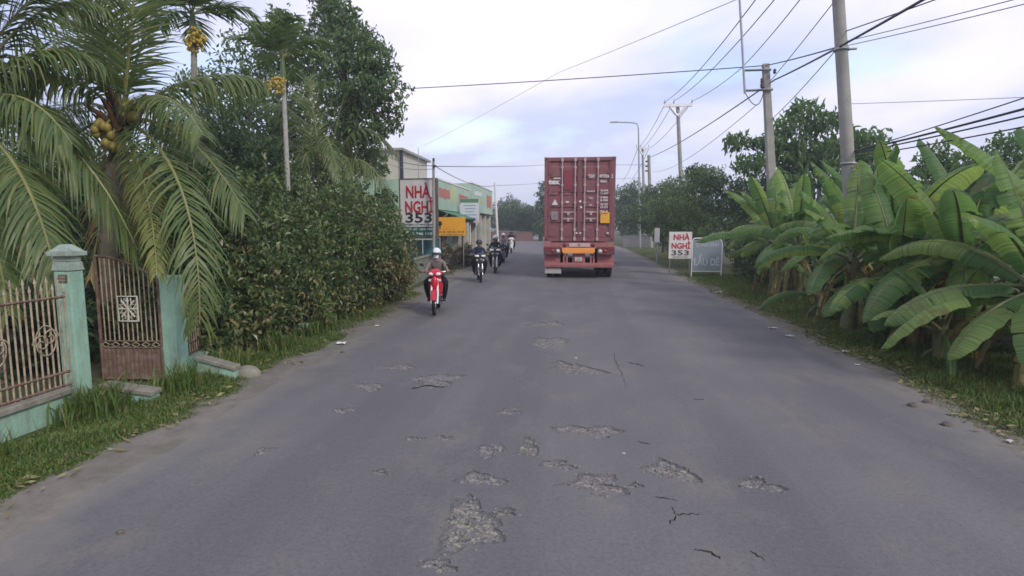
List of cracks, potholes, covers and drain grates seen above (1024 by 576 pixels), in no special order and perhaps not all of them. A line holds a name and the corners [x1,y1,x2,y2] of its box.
pothole [523,337,571,348]
pothole [406,370,467,391]
pothole [516,435,539,457]
pothole [493,506,522,517]
pothole [637,457,703,483]
pothole [548,357,612,375]
pothole [351,382,385,392]
pothole [495,406,522,416]
pothole [549,424,627,439]
pothole [426,493,507,556]
pothole [475,443,508,460]
pothole [554,472,631,499]
